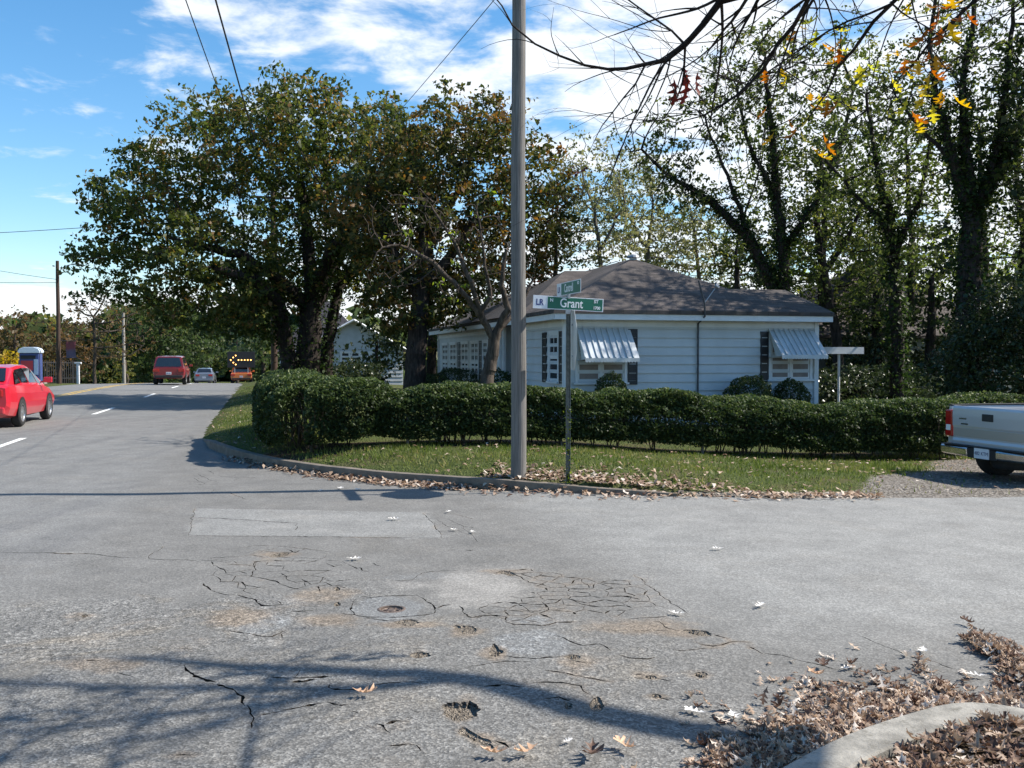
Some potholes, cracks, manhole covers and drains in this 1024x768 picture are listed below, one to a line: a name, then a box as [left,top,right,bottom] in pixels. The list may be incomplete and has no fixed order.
manhole cover [377,605,406,613]
pothole [453,625,477,634]
pothole [489,643,504,657]
crack [203,545,379,637]
crack [342,569,842,683]
pothole [589,696,604,711]
pothole [442,700,481,722]
crack [175,665,421,751]
